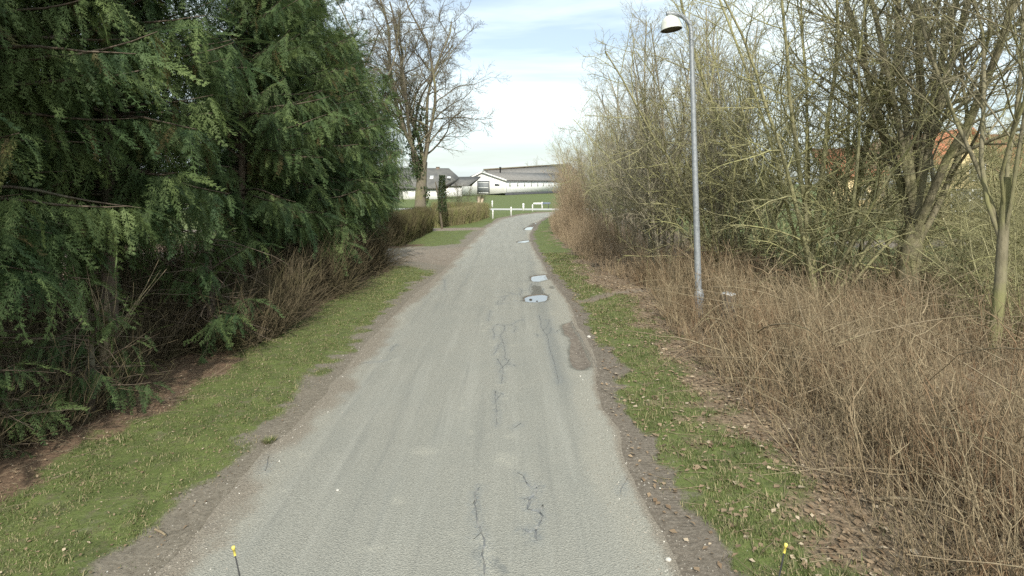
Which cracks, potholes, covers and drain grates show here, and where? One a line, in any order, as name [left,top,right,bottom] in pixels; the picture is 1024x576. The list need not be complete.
crack [488,284,597,425]
pothole [530,274,551,282]
crack [474,487,486,575]
pothole [523,294,548,302]
crack [522,475,544,541]
